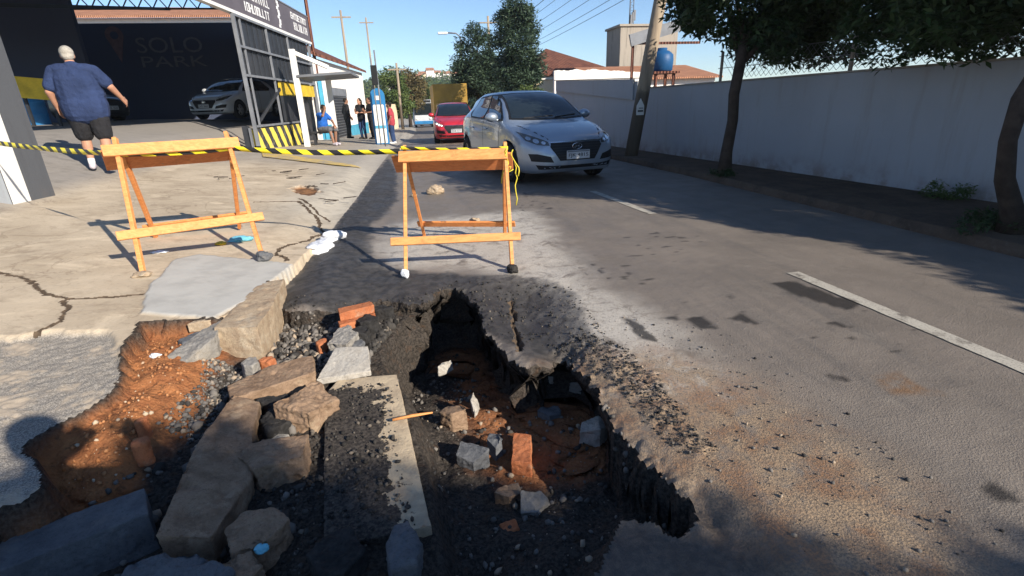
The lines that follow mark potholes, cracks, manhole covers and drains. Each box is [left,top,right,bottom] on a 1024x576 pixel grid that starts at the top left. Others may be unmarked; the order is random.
crack [260,198,330,261]
crack [0,272,144,338]
pothole [0,281,700,576]
